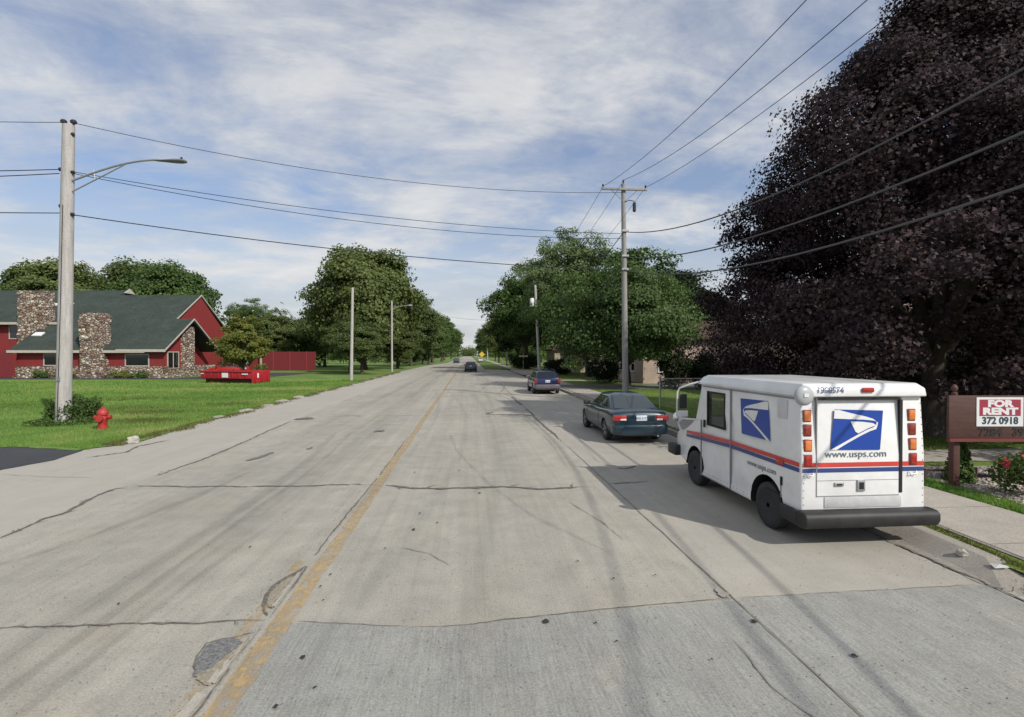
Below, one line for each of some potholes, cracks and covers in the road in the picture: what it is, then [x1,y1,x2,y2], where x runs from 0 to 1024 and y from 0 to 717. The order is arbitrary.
pothole [262,566,305,615]
crack [167,483,622,538]
crack [0,474,122,538]
